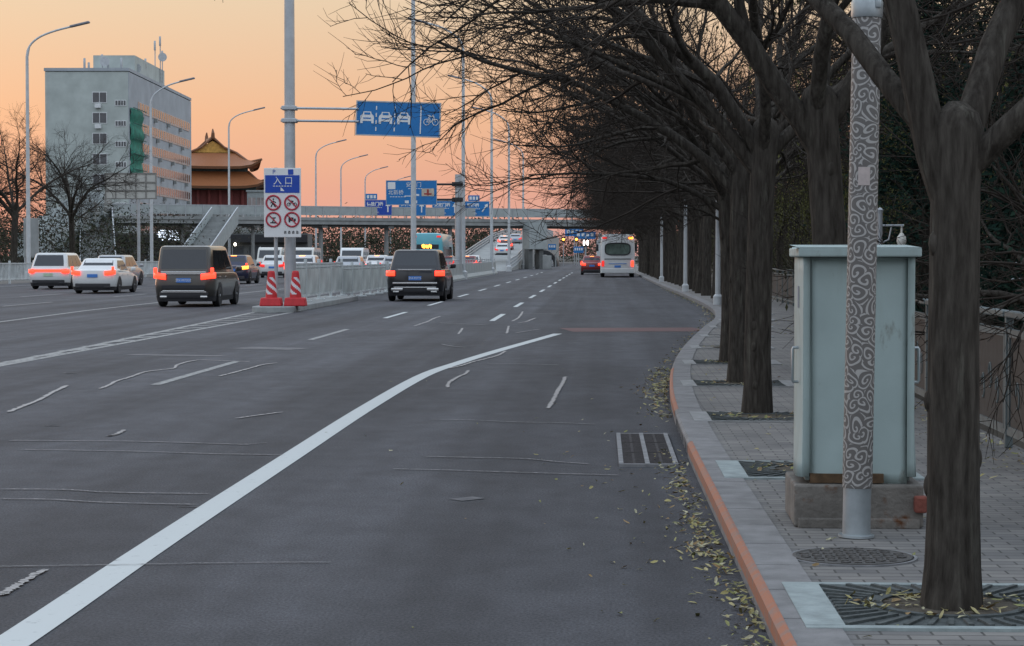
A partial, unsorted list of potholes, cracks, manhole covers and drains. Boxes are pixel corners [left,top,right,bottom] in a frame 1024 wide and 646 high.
crack [8,385,284,455]
drain grate [616,433,680,467]
crack [101,360,271,388]
manhole cover [792,547,918,567]
